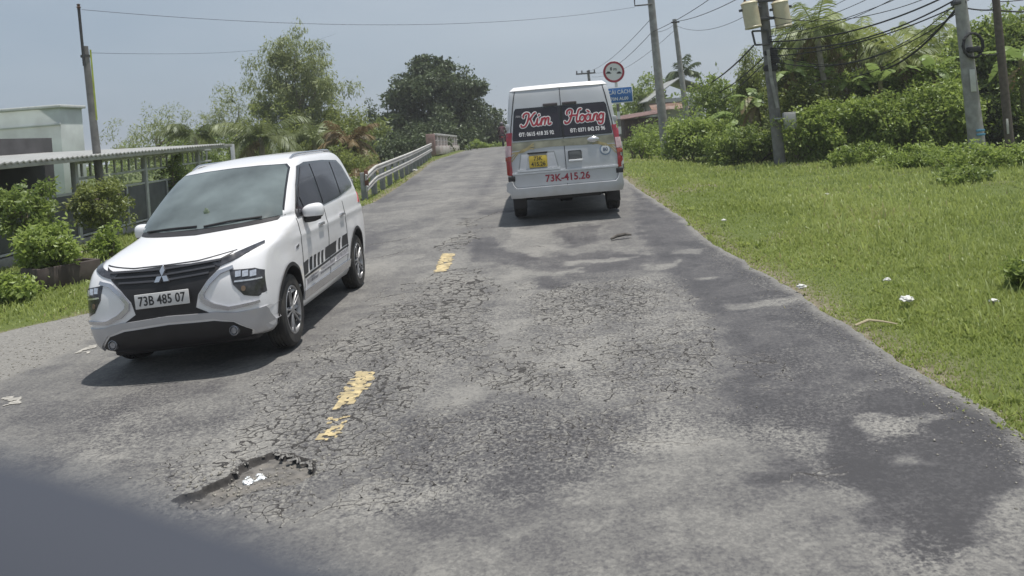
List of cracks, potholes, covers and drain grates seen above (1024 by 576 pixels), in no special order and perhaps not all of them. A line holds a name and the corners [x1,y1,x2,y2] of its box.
crack [145,210,794,528]
pothole [156,447,335,517]
